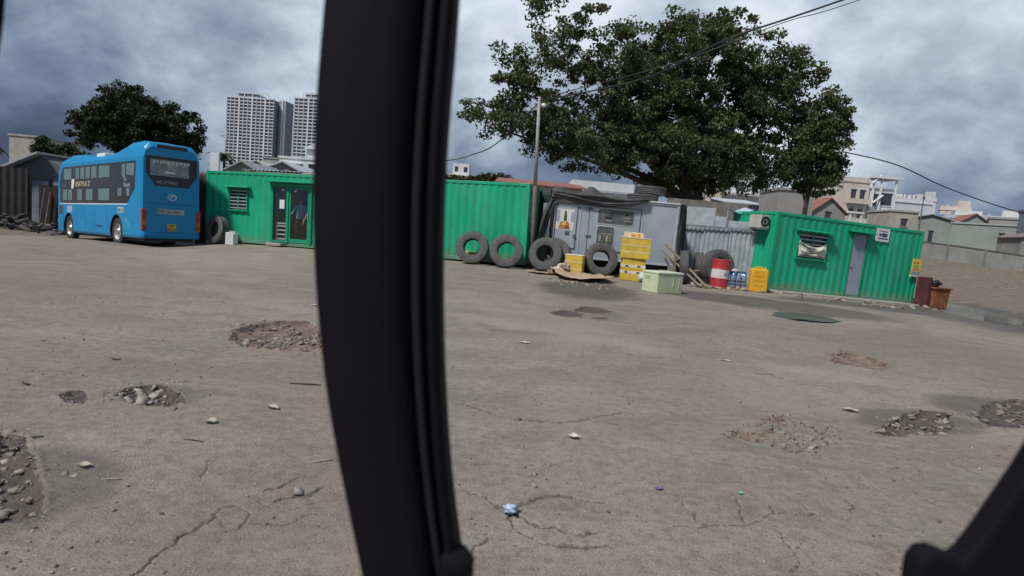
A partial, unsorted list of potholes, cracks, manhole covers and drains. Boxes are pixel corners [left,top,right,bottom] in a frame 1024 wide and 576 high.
crack [447,393,892,576]
crack [78,446,352,576]
pothole [852,404,984,446]
pothole [207,318,322,357]
pothole [813,350,908,375]
pothole [0,422,94,548]
pothole [949,393,1024,436]
pothole [100,379,213,416]
